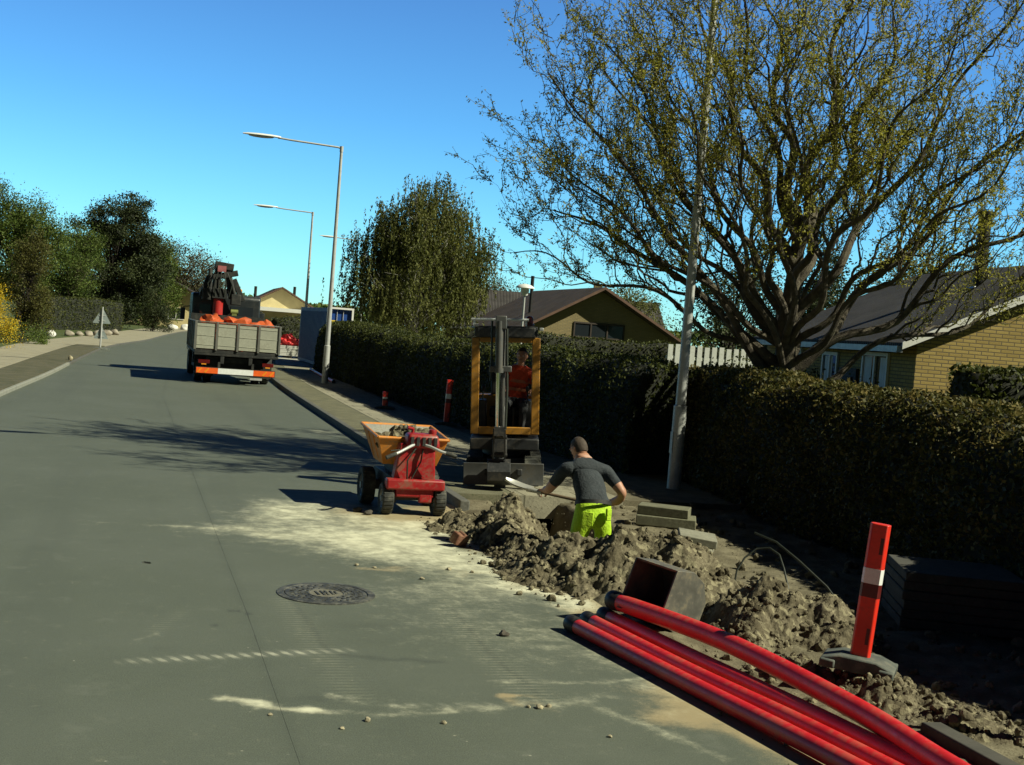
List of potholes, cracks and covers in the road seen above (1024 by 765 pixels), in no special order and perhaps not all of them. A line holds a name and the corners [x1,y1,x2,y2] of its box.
manhole cover [277,582,375,605]
